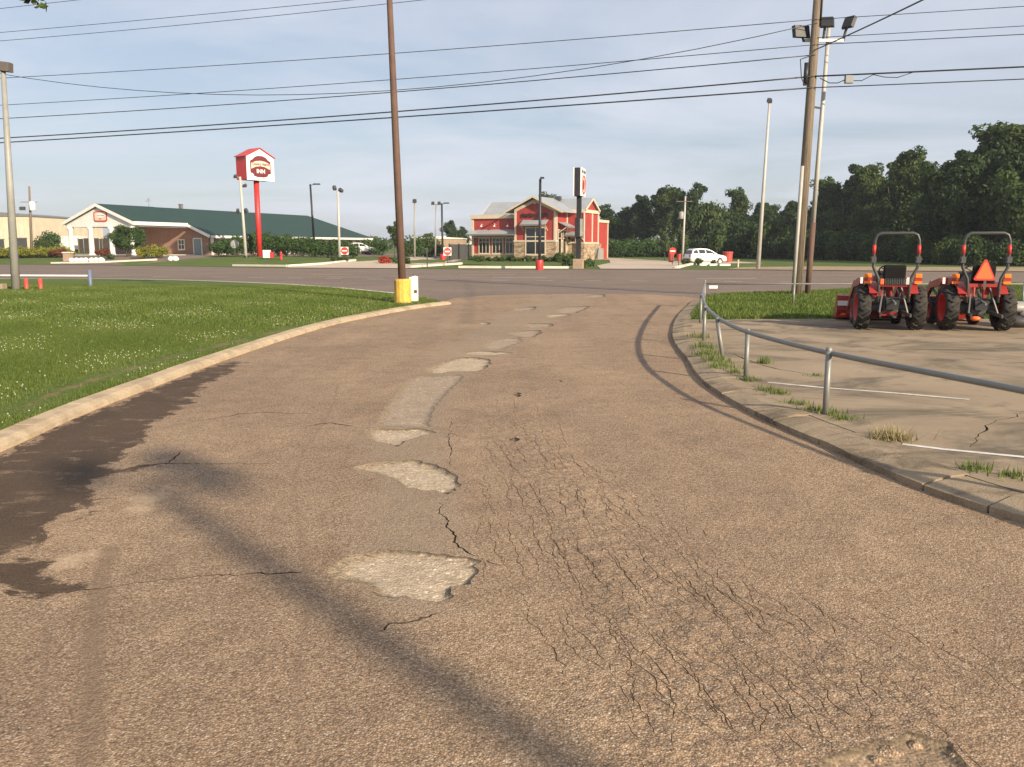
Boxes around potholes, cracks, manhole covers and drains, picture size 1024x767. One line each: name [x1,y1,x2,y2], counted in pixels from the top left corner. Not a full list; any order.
crack [378,612,442,632]
pothole [352,459,462,494]
crack [22,572,300,593]
pothole [804,731,969,767]
crack [439,502,498,565]
crack [476,398,1024,767]
crack [208,412,356,427]
pothole [326,549,482,602]
